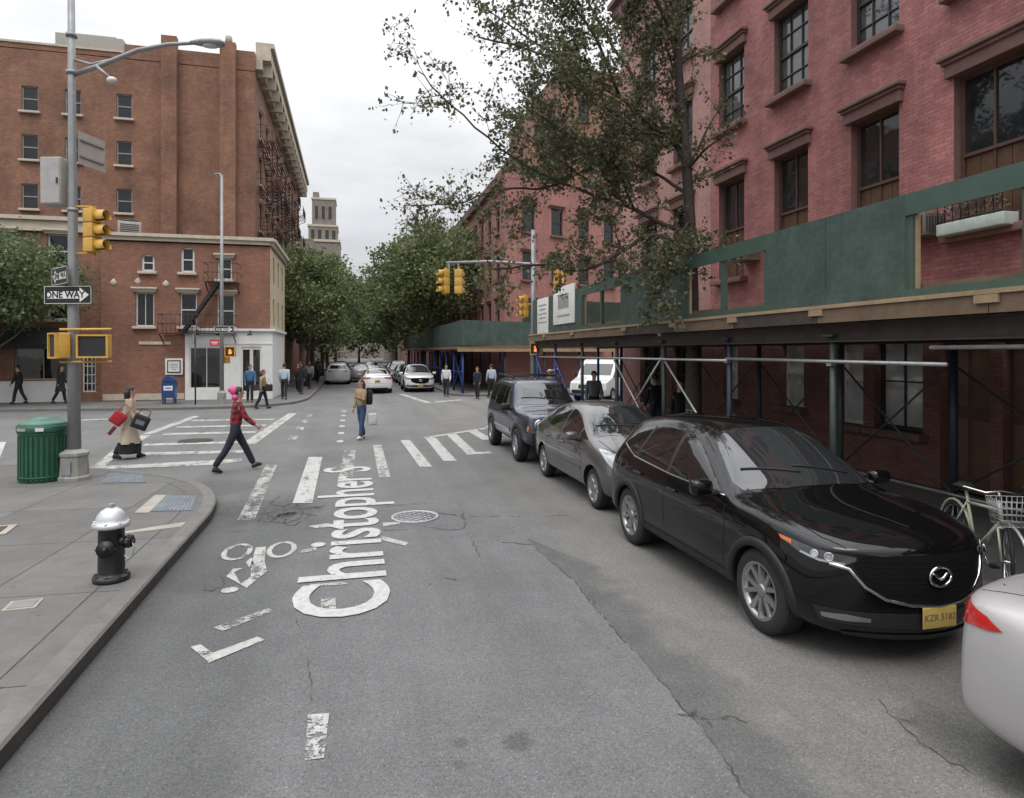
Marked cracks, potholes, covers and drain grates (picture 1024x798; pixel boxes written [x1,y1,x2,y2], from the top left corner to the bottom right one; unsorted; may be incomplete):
crack [384,503,566,562]
manhole cover [391,510,439,523]
crack [549,560,751,798]
crack [875,695,1017,795]
